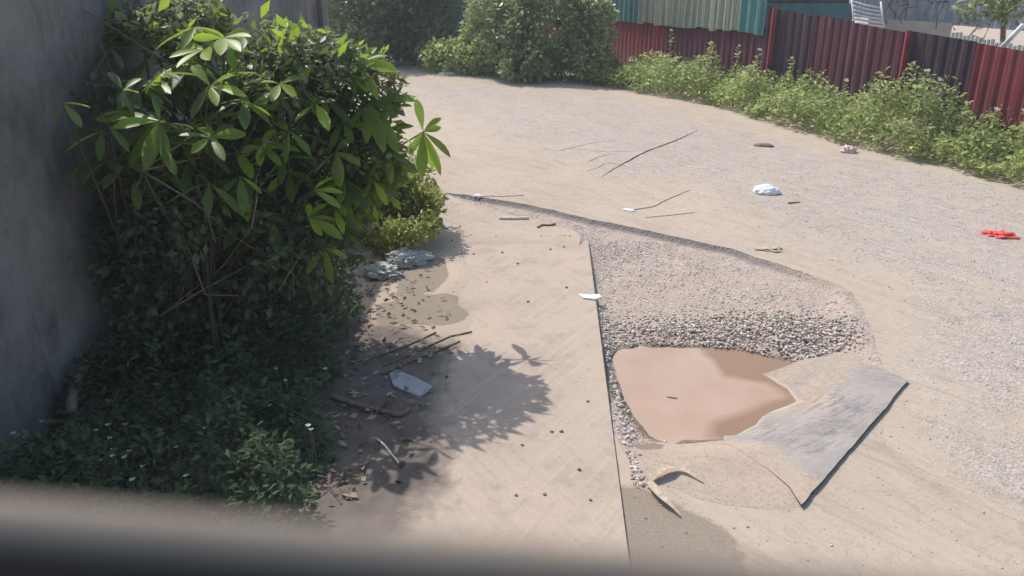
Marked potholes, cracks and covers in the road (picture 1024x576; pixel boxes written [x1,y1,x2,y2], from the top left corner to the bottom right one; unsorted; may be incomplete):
crack [547,131,696,176]
pothole [446,192,883,463]
